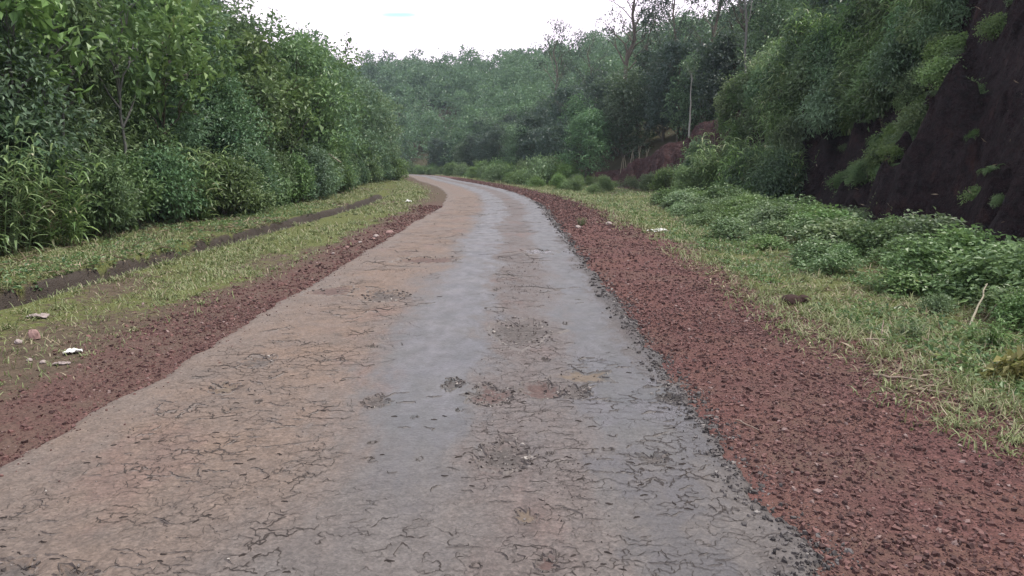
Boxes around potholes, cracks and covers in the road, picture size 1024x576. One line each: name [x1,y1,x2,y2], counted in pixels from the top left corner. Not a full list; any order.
pothole [516,379,567,402]
crack [0,198,801,576]
pothole [357,289,412,302]
pothole [512,506,539,525]
pothole [553,383,594,401]
pothole [360,393,392,410]
pothole [462,381,520,407]
pothole [487,316,570,352]
pothole [469,438,539,475]
pothole [440,376,467,392]
